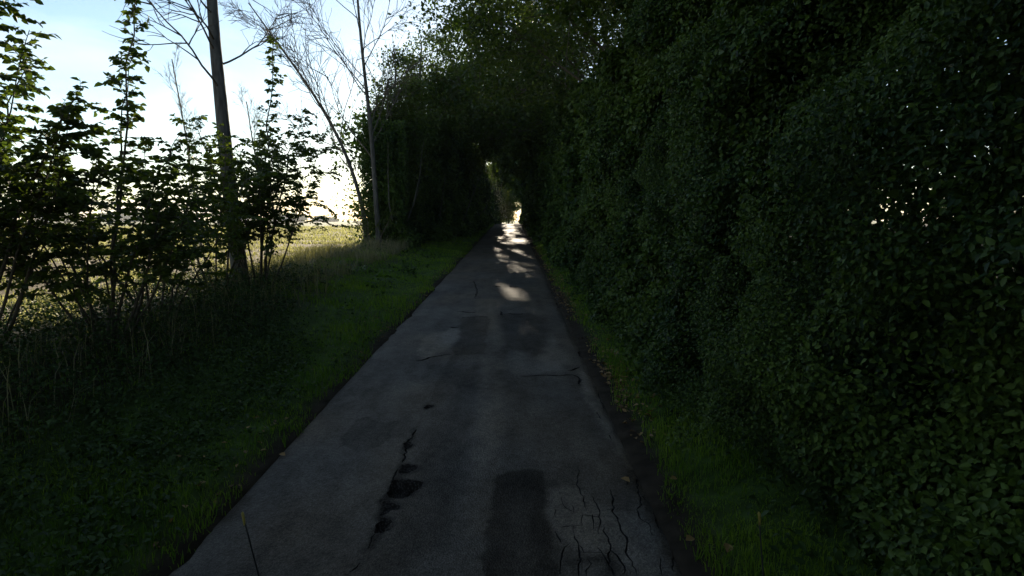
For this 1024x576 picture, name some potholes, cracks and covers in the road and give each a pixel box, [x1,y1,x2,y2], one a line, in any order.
pothole [374,517,392,533]
pothole [387,479,424,499]
pothole [380,501,401,516]
crack [554,469,660,576]
pothole [399,464,418,474]
